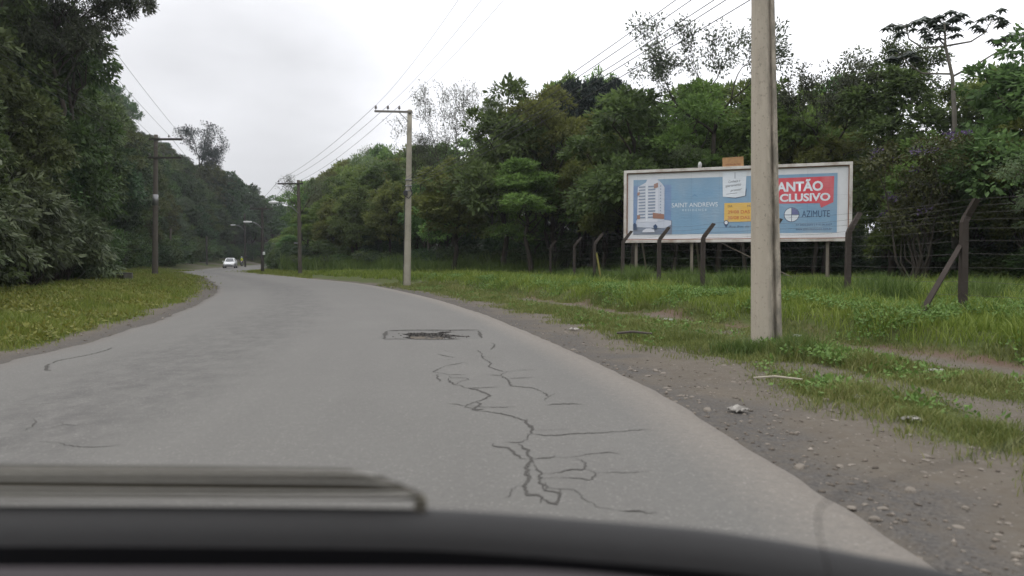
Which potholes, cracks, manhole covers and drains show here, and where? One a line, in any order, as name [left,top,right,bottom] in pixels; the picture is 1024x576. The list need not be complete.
crack [433,342,653,513]
pothole [393,330,470,340]
